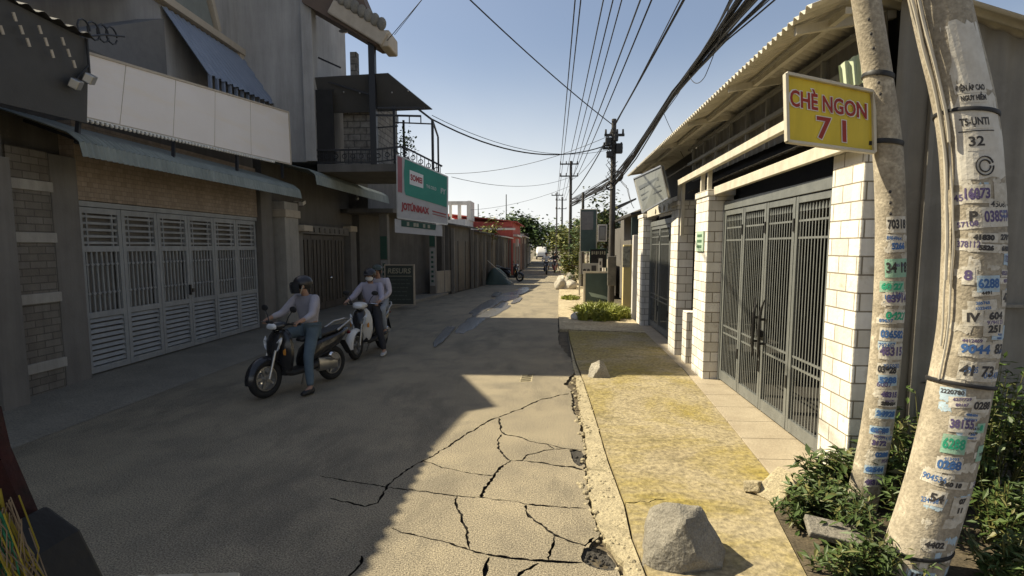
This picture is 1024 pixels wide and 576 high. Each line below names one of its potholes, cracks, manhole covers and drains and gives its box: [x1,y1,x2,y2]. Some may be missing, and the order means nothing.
pothole [581,547,616,571]
crack [322,394,594,576]
pothole [569,450,585,466]
